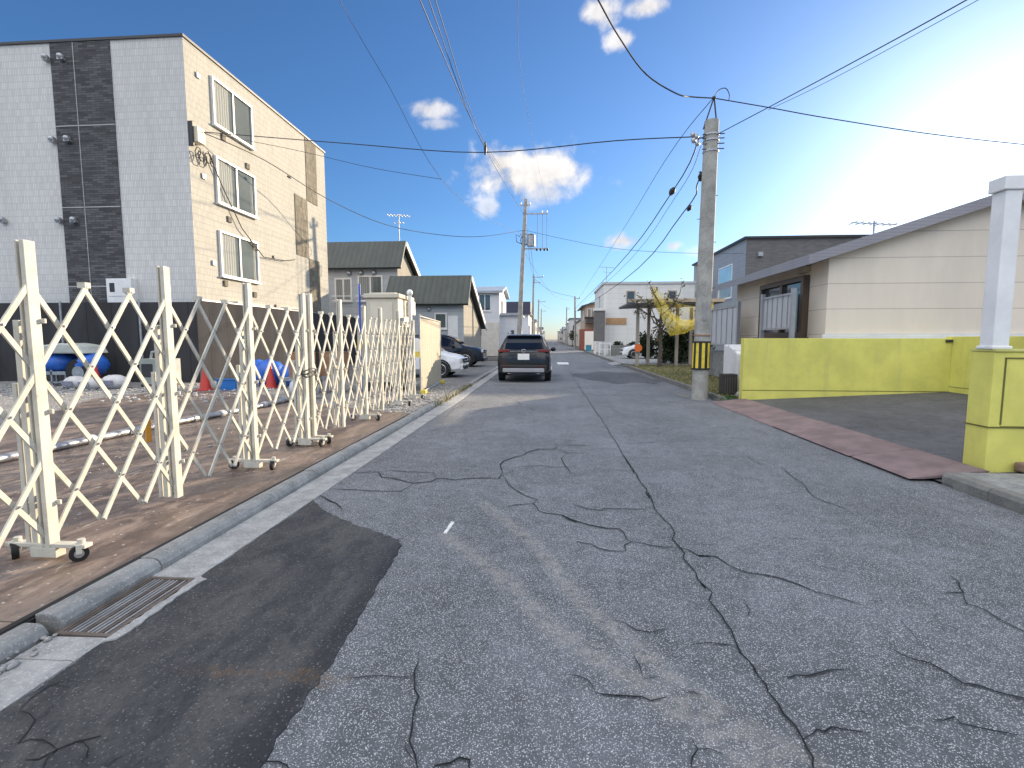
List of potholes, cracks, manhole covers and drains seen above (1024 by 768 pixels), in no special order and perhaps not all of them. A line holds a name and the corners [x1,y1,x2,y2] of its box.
drain grate [54,576,195,638]
crack [888,620,1024,699]
crack [932,716,1021,736]
crack [940,575,1024,632]
crack [17,680,124,768]
crack [320,368,882,768]
